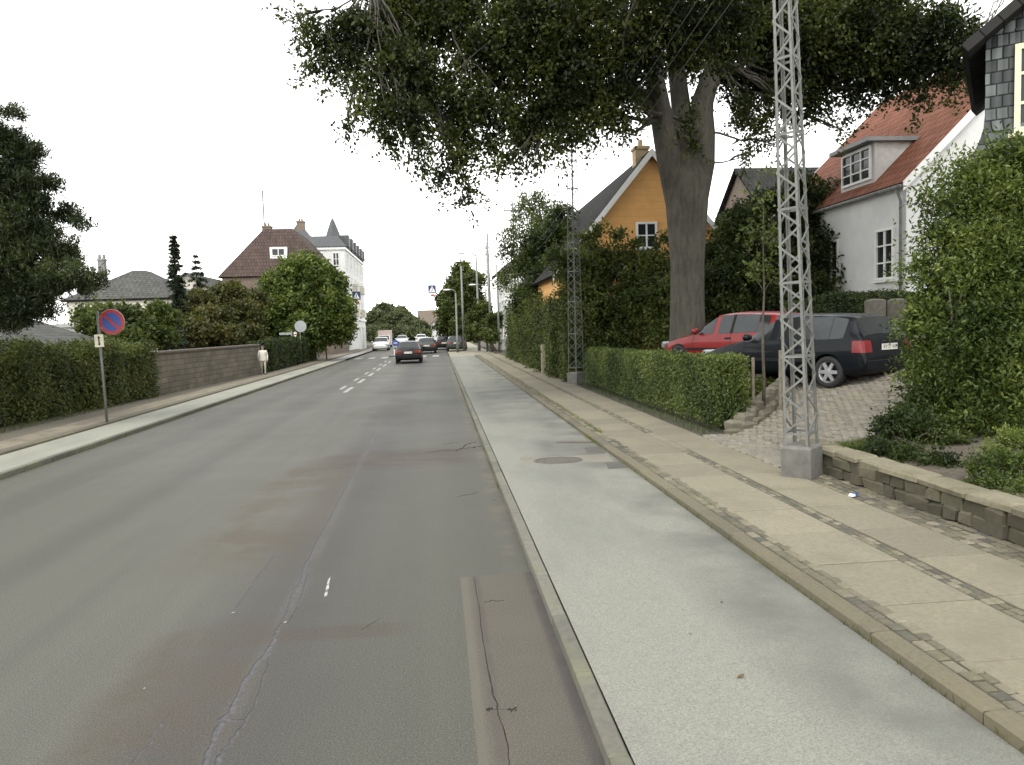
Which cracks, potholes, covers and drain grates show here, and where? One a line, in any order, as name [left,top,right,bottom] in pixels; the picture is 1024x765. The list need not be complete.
crack [202,429,376,765]
crack [474,579,517,765]
